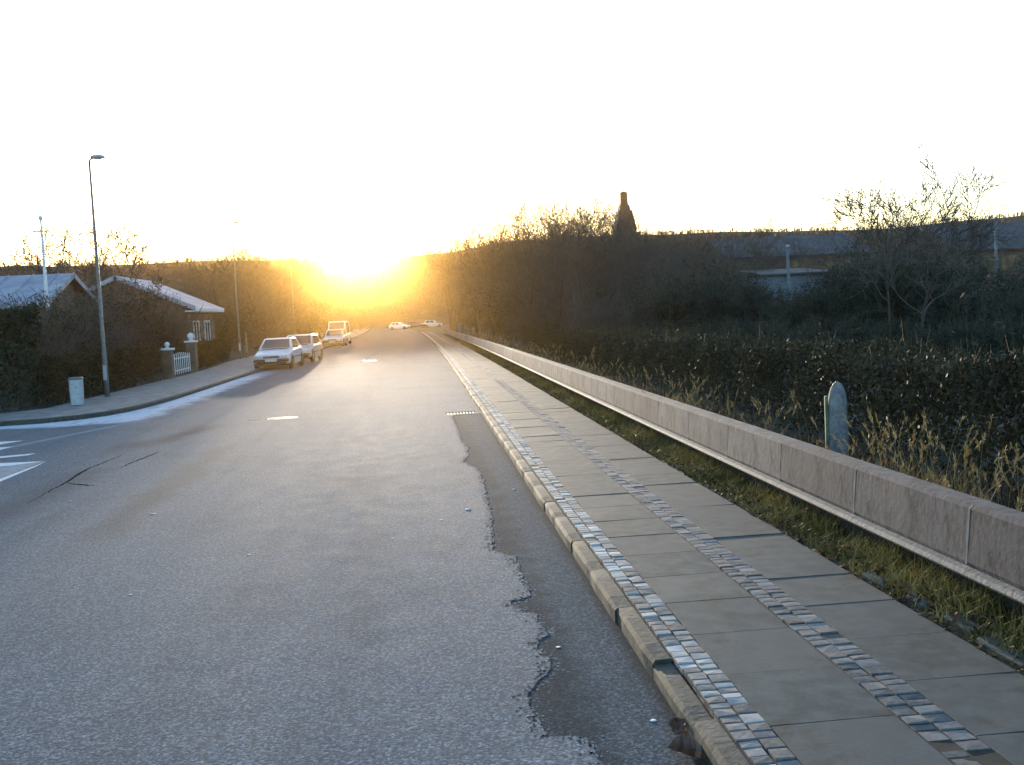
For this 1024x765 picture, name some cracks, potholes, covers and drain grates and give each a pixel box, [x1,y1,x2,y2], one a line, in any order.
crack [28,451,159,503]
